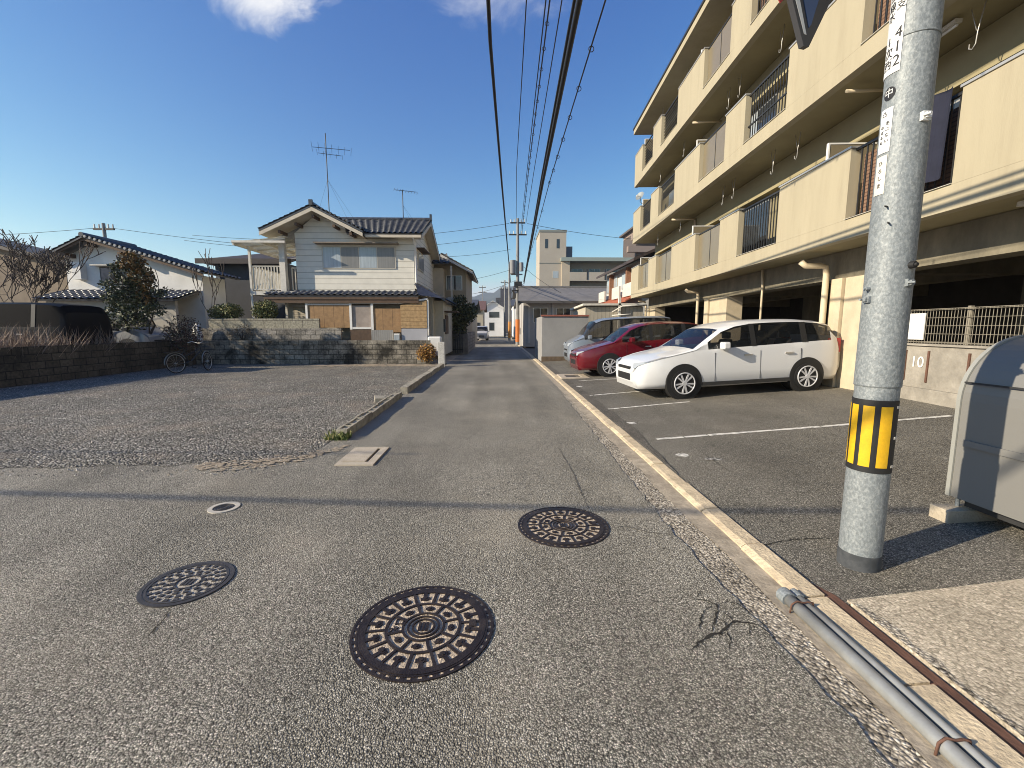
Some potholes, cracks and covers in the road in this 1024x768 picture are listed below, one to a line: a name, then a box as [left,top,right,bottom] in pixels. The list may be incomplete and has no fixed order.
utility cover [207,502,240,514]
crack [559,449,588,507]
manhole cover [518,507,609,548]
manhole cover [136,561,235,608]
manhole cover [349,586,493,683]
crack [688,589,810,650]
